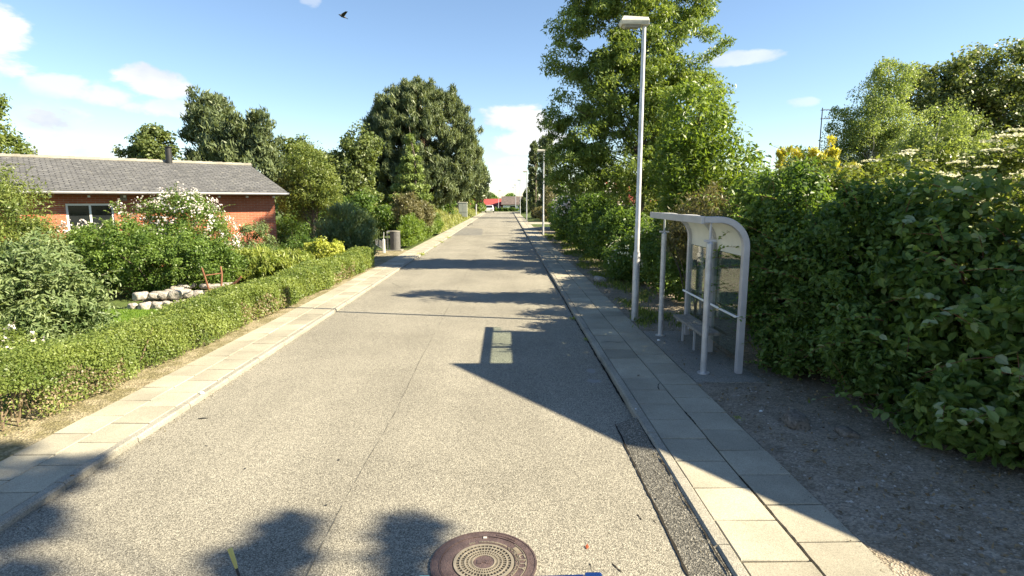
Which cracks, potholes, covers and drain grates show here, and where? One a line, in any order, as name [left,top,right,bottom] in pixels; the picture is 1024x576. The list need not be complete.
manhole cover [430,531,537,576]
